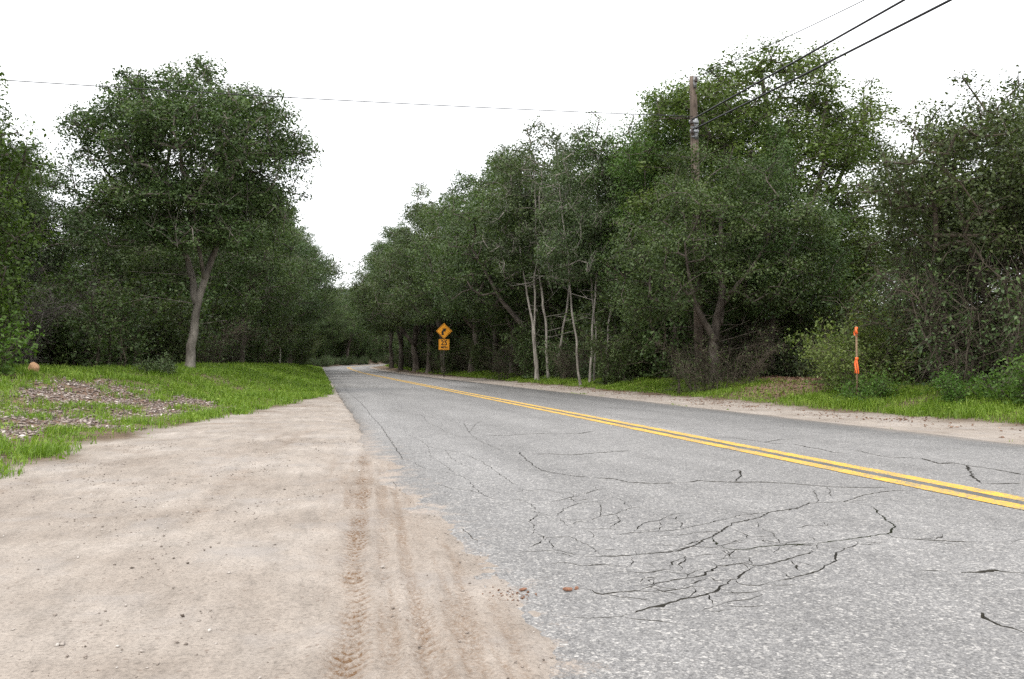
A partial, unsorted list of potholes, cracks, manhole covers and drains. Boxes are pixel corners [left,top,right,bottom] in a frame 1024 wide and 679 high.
crack [731,437,1023,484]
crack [345,389,884,499]
crack [981,608,1023,632]
